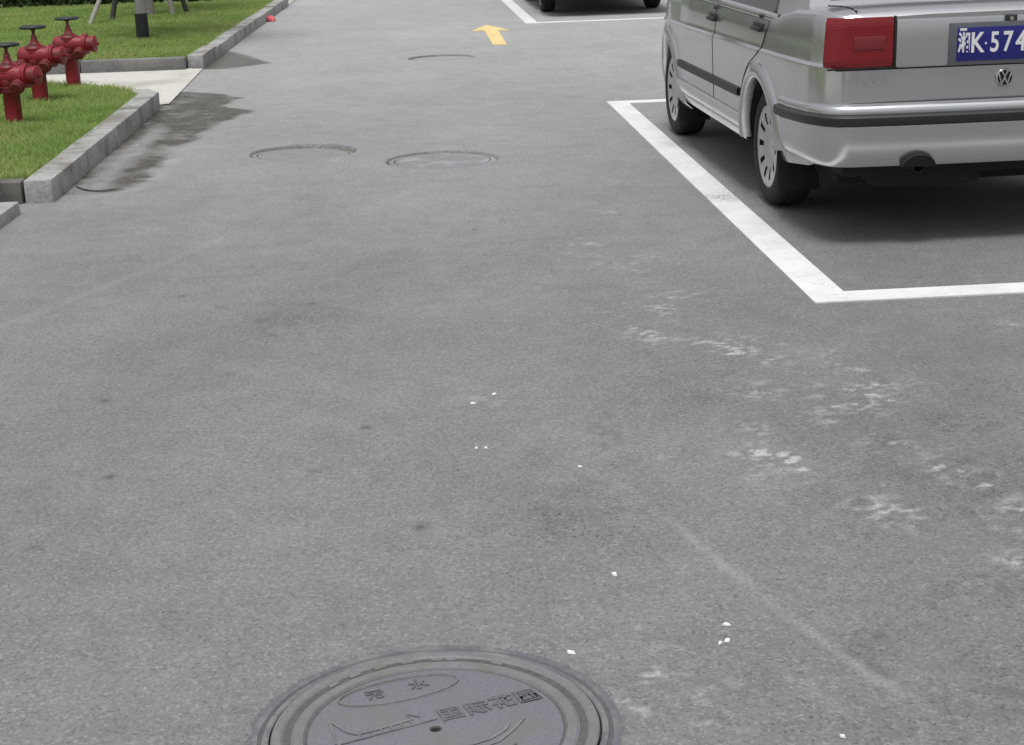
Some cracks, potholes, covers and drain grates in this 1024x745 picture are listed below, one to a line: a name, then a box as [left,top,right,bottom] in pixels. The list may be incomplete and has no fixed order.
manhole cover [389,153,496,169]
manhole cover [252,148,353,161]
manhole cover [250,645,623,745]
